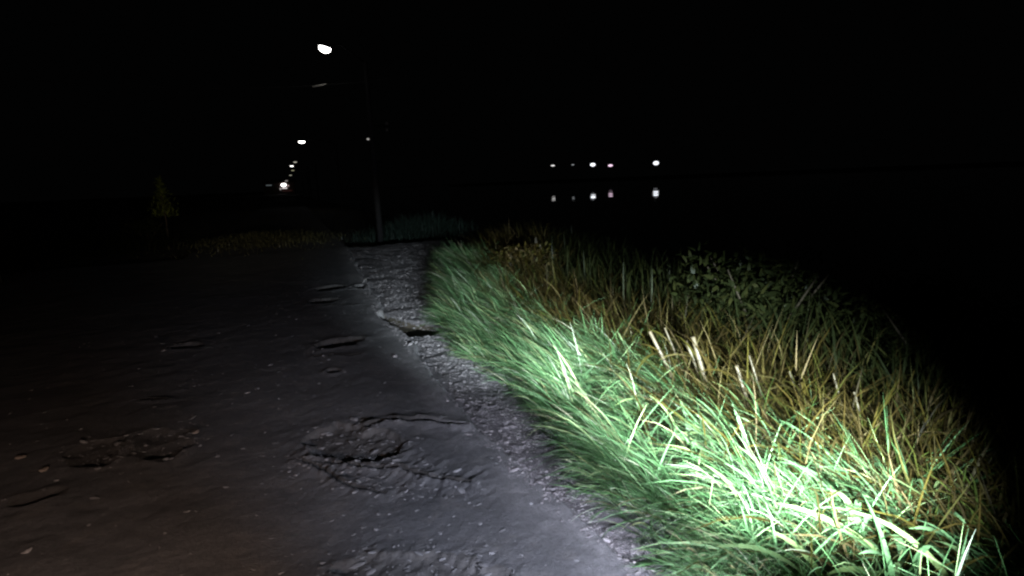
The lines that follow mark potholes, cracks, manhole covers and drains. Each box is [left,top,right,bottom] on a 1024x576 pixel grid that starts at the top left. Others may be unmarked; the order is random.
crack [364,414,467,426]
pothole [311,335,366,350]
pothole [5,485,71,507]
pothole [127,425,198,463]
pothole [167,341,206,349]
pothole [61,436,131,468]
pothole [375,309,443,335]
crack [298,457,472,493]
pothole [313,284,347,292]
pothole [298,419,407,463]
